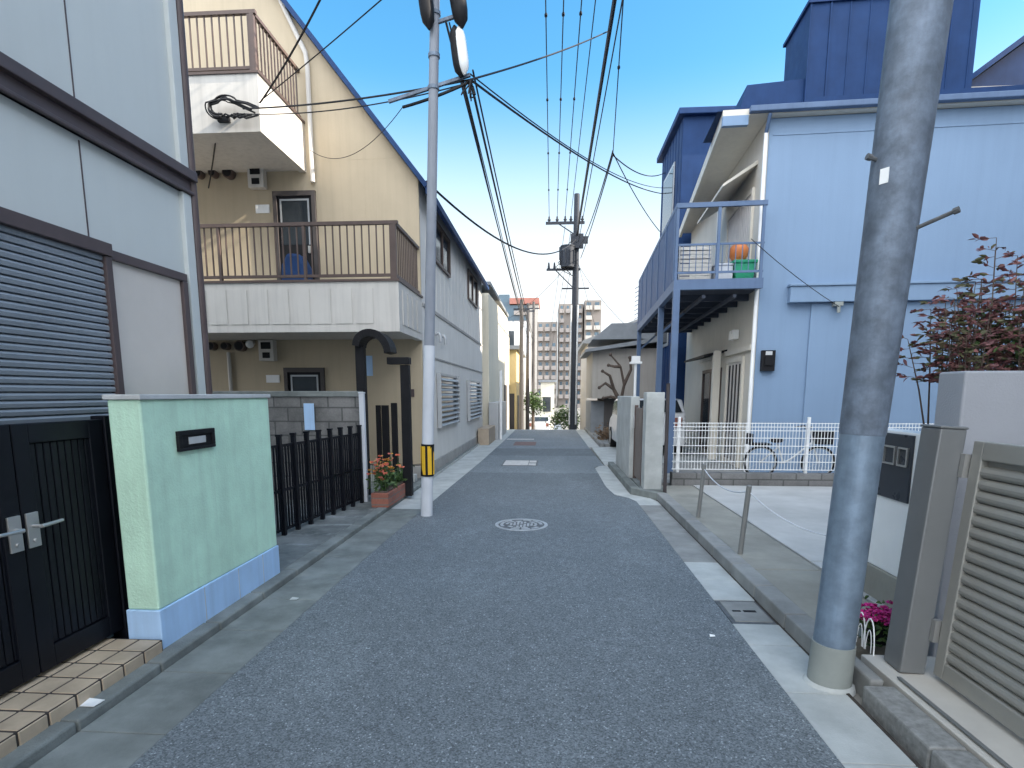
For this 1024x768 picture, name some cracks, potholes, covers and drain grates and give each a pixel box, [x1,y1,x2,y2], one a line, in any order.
manhole cover [495,519,548,531]
